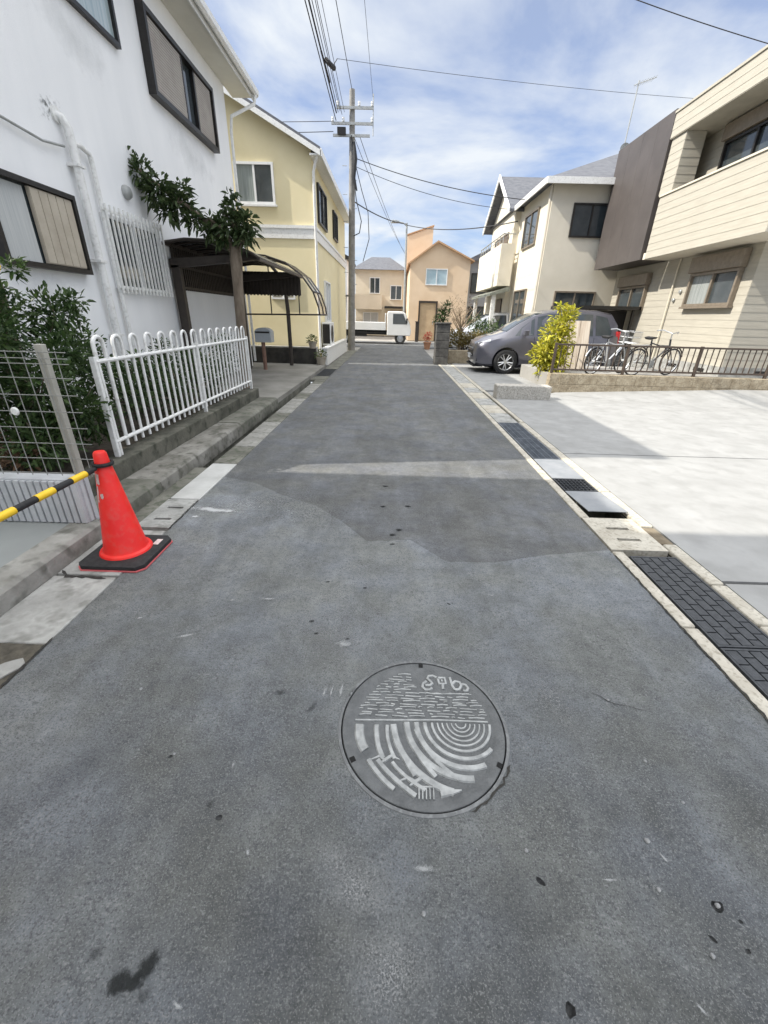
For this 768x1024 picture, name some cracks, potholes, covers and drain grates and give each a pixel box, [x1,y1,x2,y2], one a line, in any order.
drain grate [553,478,598,494]
pothole [565,1001,576,1019]
drain grate [719,648,768,700]
crack [590,555,768,722]
crack [471,765,510,812]
drain grate [629,556,768,650]
drain grate [514,439,561,461]
manhole cover [338,661,510,819]
drain grate [498,423,537,440]
